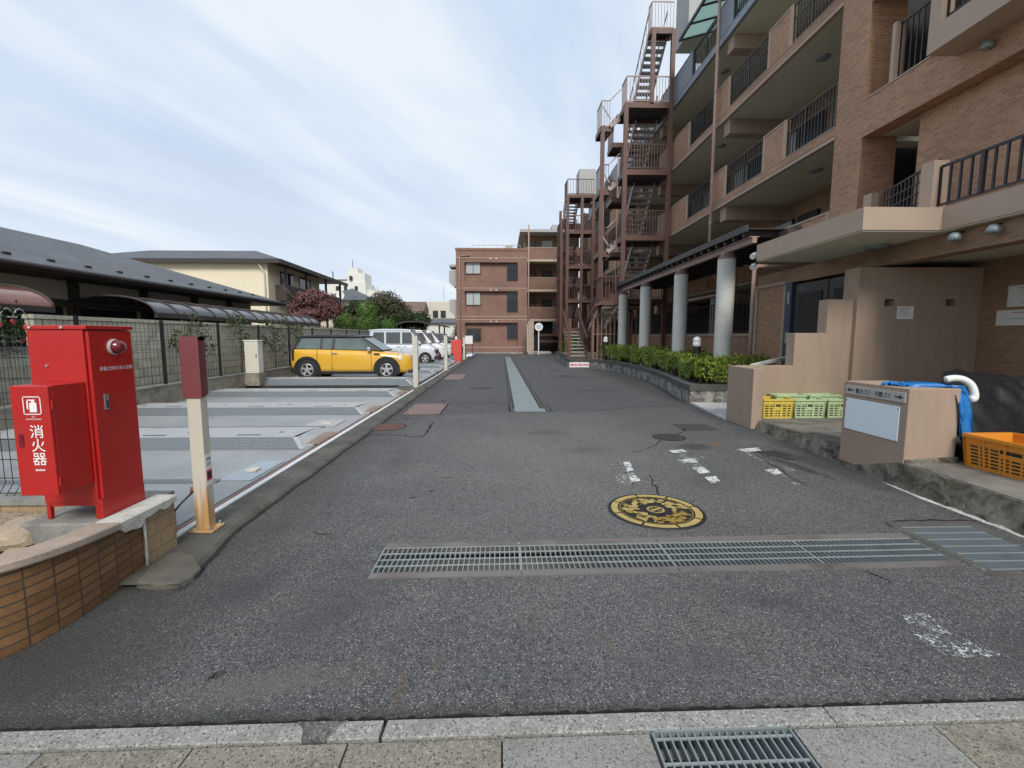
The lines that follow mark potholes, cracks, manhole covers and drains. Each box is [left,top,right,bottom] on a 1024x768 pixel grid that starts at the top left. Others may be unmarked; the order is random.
manhole cover [373,423,406,431]
drain grate [650,726,819,768]
drain grate [885,521,1024,578]
drain grate [366,533,968,580]
crack [361,417,434,440]
manhole cover [608,494,707,531]
crack [617,429,685,495]
